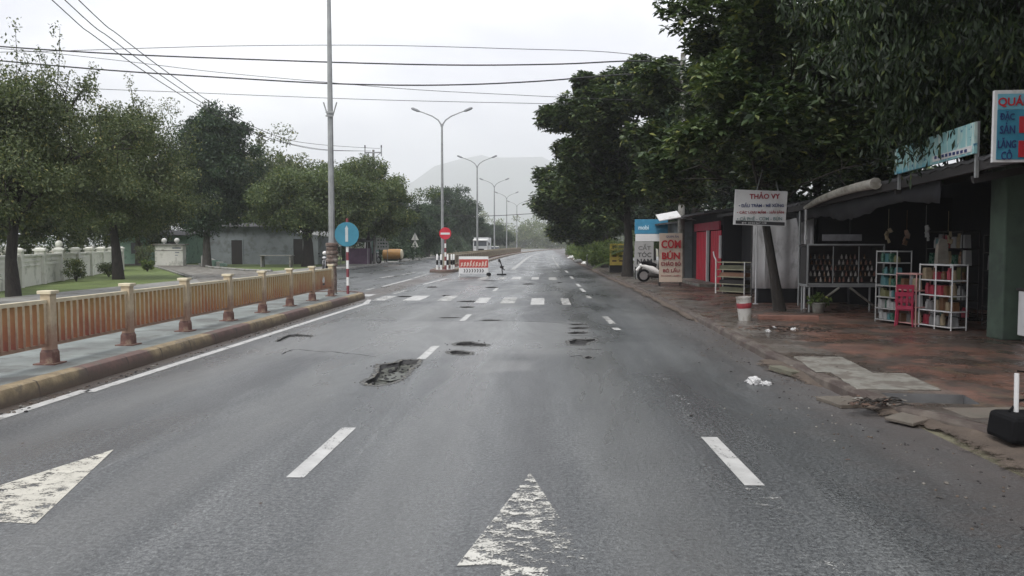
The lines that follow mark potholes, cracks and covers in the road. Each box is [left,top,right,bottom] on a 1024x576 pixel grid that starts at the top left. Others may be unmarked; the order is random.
pothole [566,338,598,346]
crack [275,334,374,357]
pothole [360,358,423,387]
